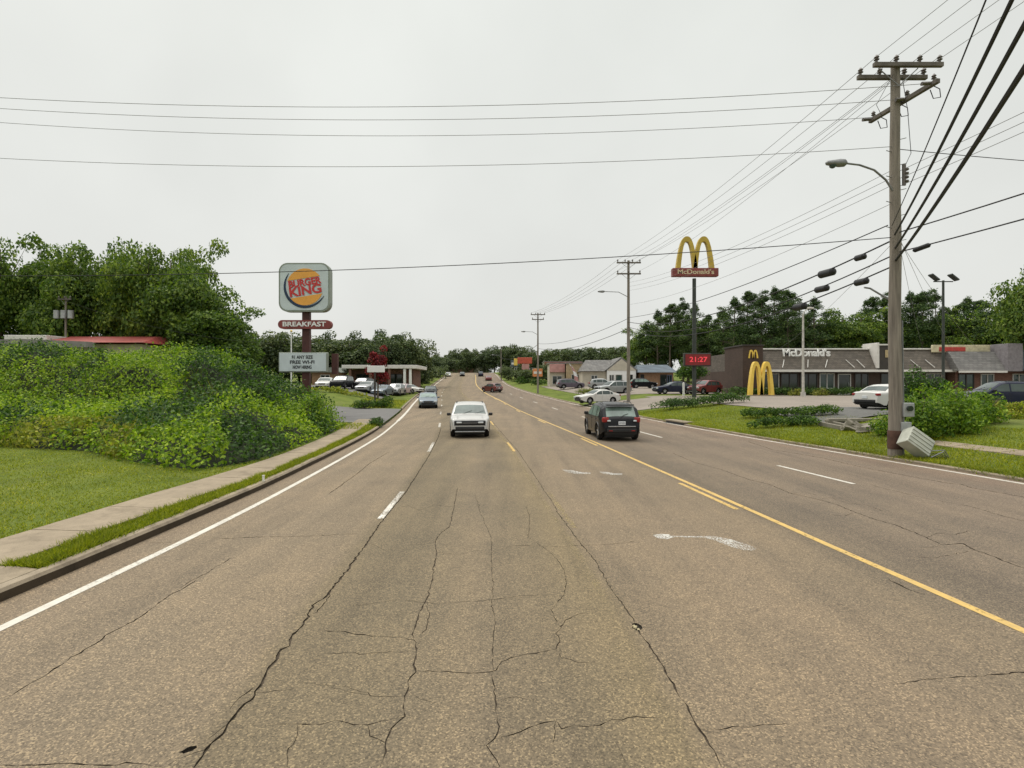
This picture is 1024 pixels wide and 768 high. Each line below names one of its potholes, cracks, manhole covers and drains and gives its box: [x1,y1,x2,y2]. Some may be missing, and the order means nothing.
crack [901,672,1024,684]
crack [4,429,656,768]
crack [493,422,787,765]
